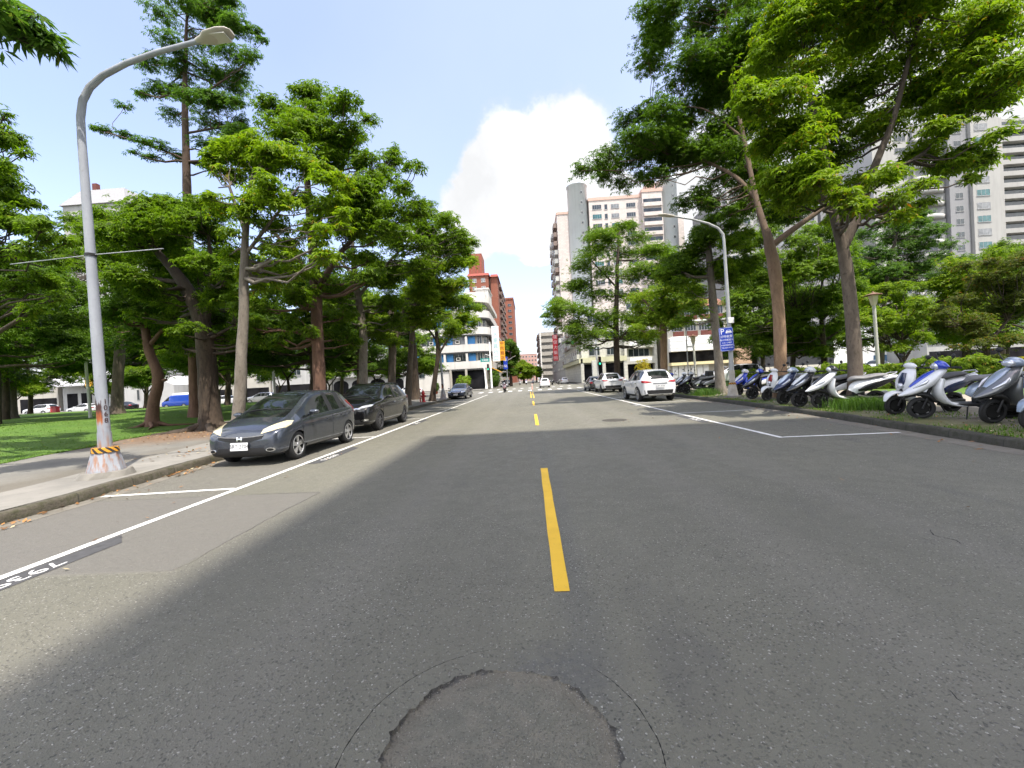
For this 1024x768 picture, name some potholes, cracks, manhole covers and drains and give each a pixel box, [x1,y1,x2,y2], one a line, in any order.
pothole [378,669,625,768]
